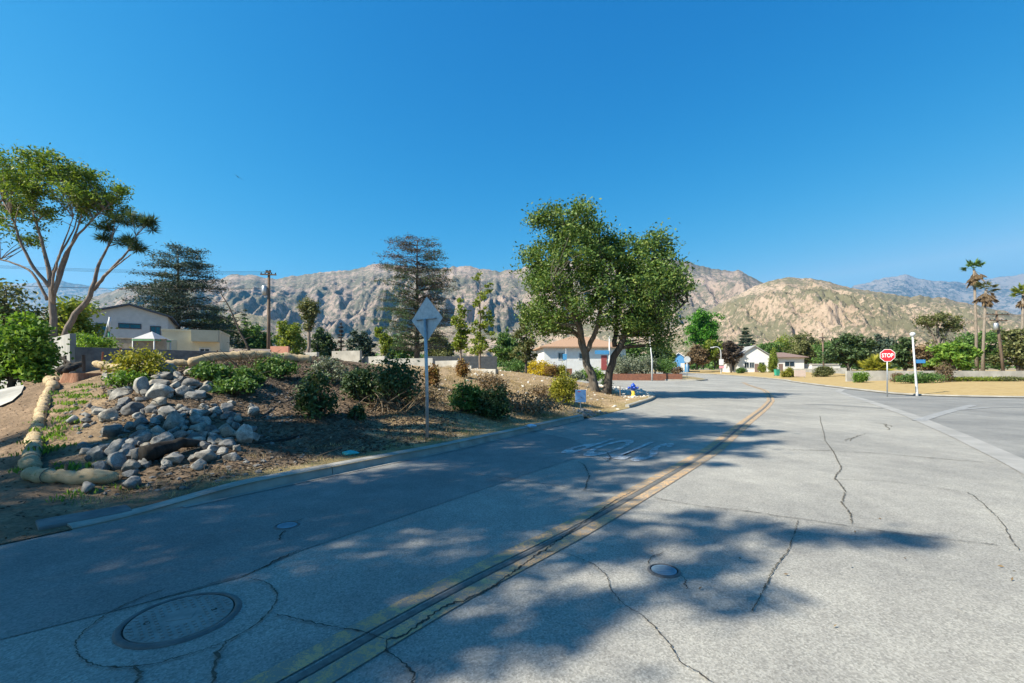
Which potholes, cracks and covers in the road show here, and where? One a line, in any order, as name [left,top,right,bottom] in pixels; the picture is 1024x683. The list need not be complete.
manhole cover [112,592,242,650]
crack [655,418,1020,611]
crack [74,490,714,683]
manhole cover [647,563,681,578]
manhole cover [273,521,300,530]
